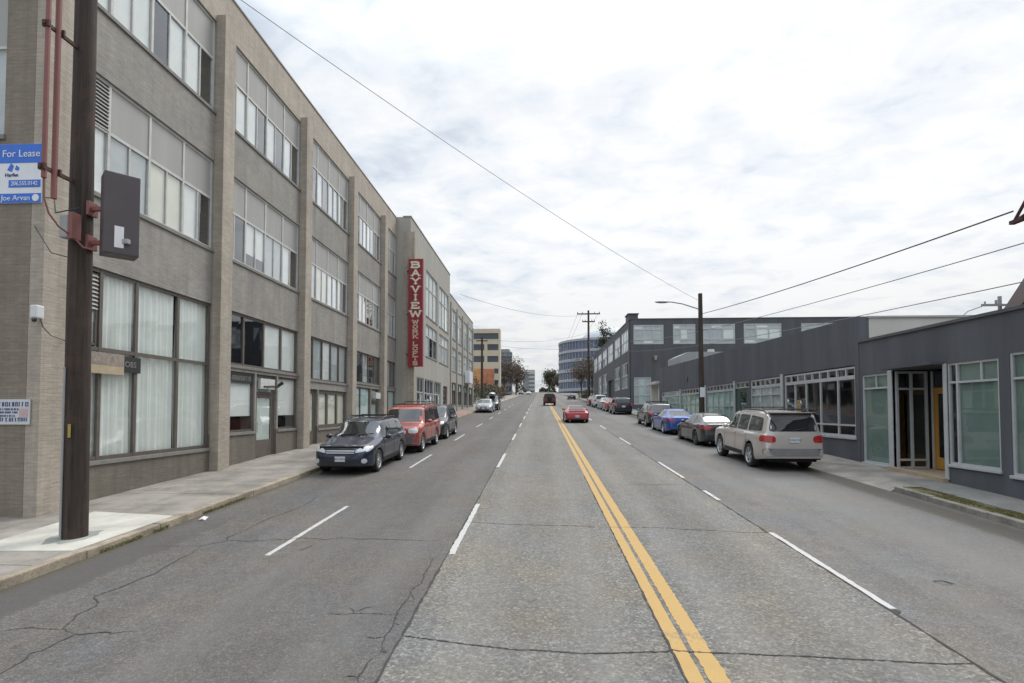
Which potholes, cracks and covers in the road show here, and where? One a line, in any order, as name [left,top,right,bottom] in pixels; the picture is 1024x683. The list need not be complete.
crack [1,546,201,673]
crack [332,554,439,682]
